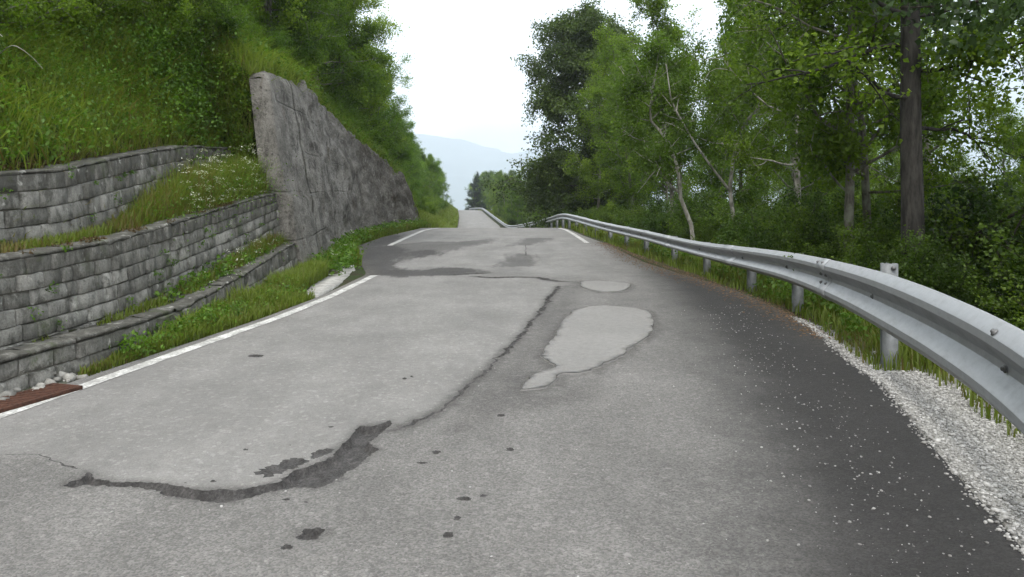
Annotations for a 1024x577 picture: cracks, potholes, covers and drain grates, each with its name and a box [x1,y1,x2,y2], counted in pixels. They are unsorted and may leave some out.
pothole [295,527,325,540]
drain grate [0,383,83,413]
crack [5,454,78,469]
crack [400,273,567,429]
